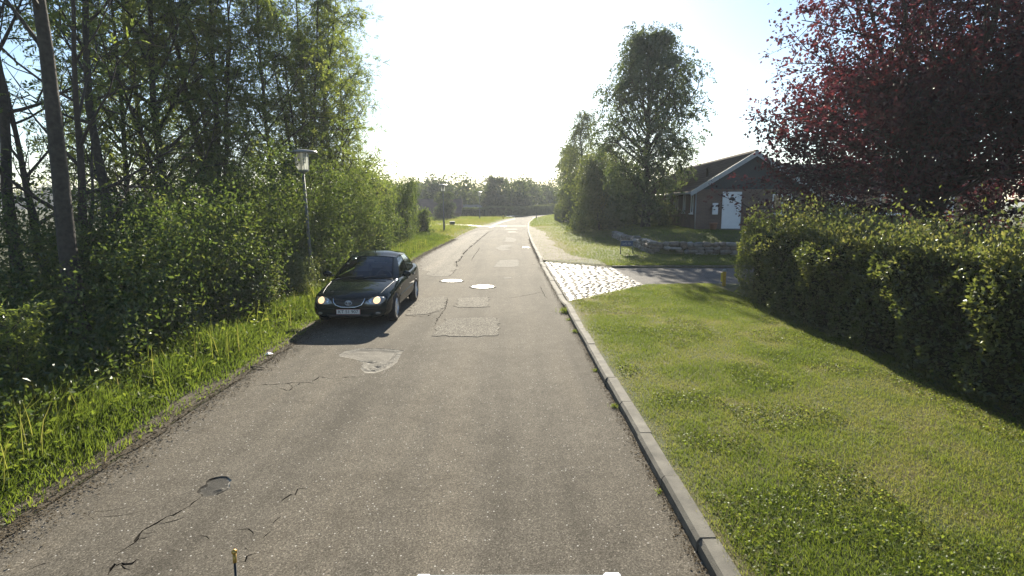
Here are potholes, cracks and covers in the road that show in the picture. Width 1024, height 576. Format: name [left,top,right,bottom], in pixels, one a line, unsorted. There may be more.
pothole [197,476,232,497]
crack [89,499,198,575]
crack [263,376,363,391]
